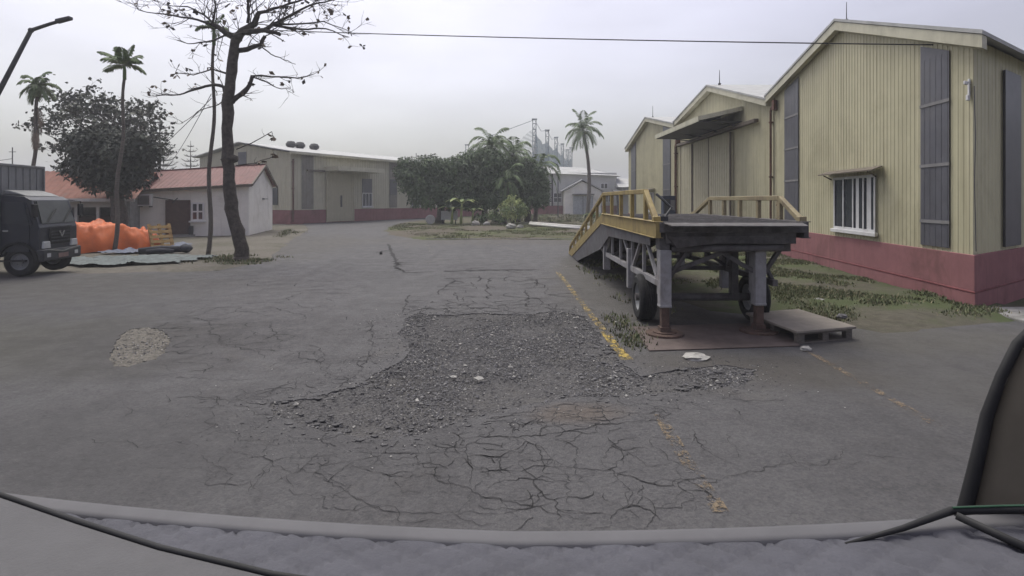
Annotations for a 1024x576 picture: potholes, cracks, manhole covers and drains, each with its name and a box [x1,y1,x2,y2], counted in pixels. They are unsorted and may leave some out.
crack [376,244,608,332]
crack [92,281,904,531]
pothole [240,309,778,447]
